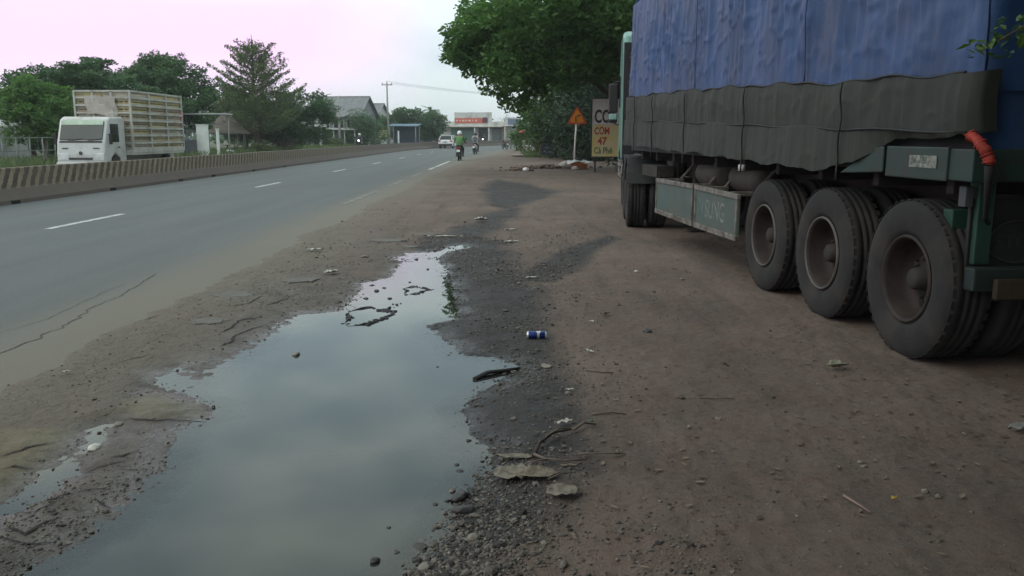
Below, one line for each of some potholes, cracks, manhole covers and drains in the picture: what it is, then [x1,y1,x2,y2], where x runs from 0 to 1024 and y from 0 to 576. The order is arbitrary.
pothole [0,257,539,576]
crack [1,275,153,353]
pothole [384,242,477,261]
